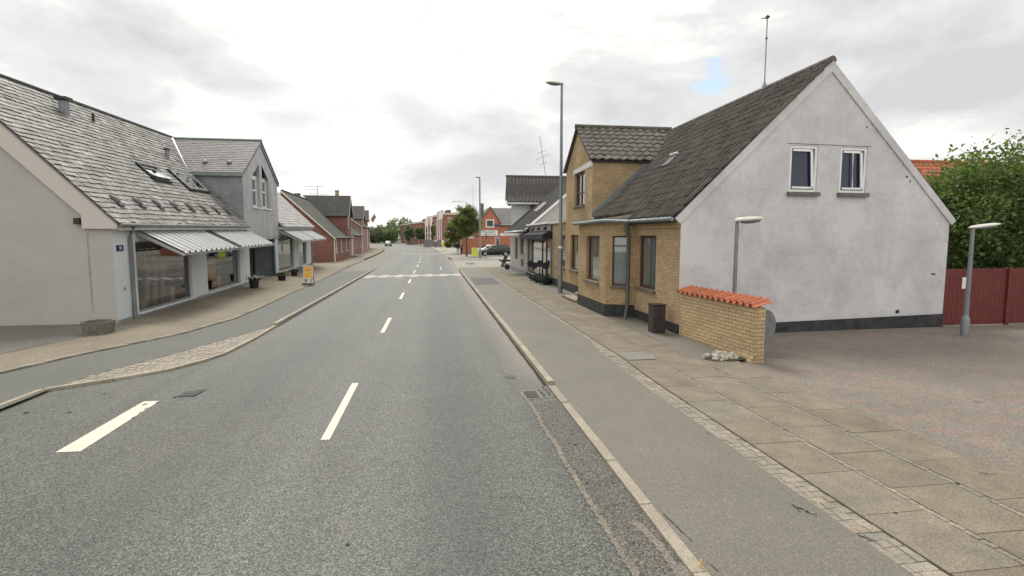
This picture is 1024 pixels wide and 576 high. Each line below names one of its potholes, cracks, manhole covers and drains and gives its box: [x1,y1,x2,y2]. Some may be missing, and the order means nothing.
crack [631,513,693,576]
drain grate [520,390,544,399]
